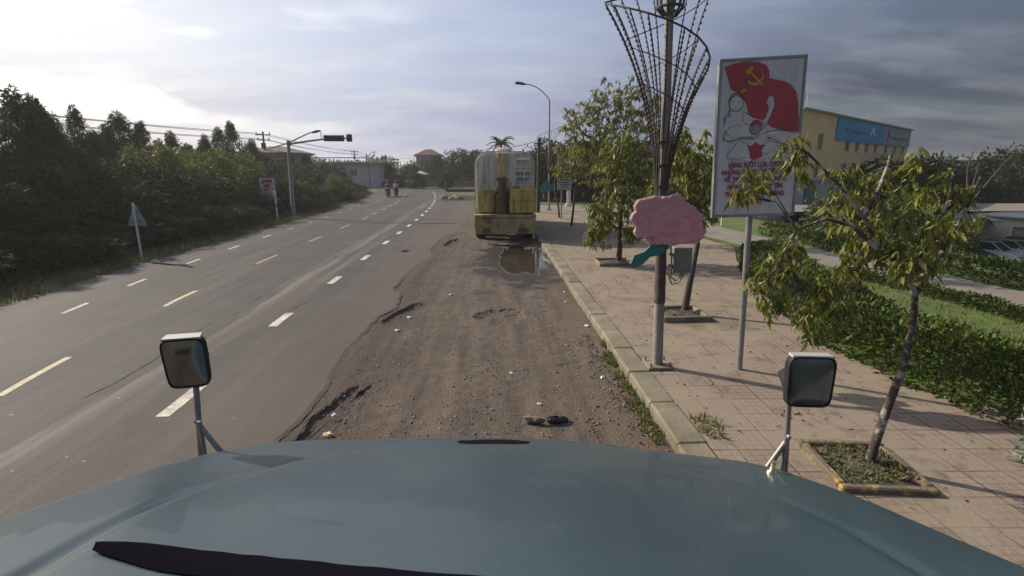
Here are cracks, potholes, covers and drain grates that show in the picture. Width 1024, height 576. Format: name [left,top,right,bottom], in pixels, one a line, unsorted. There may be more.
pothole [374,300,428,328]
pothole [499,243,552,276]
pothole [470,307,532,325]
pothole [441,238,463,248]
pothole [288,376,384,442]
